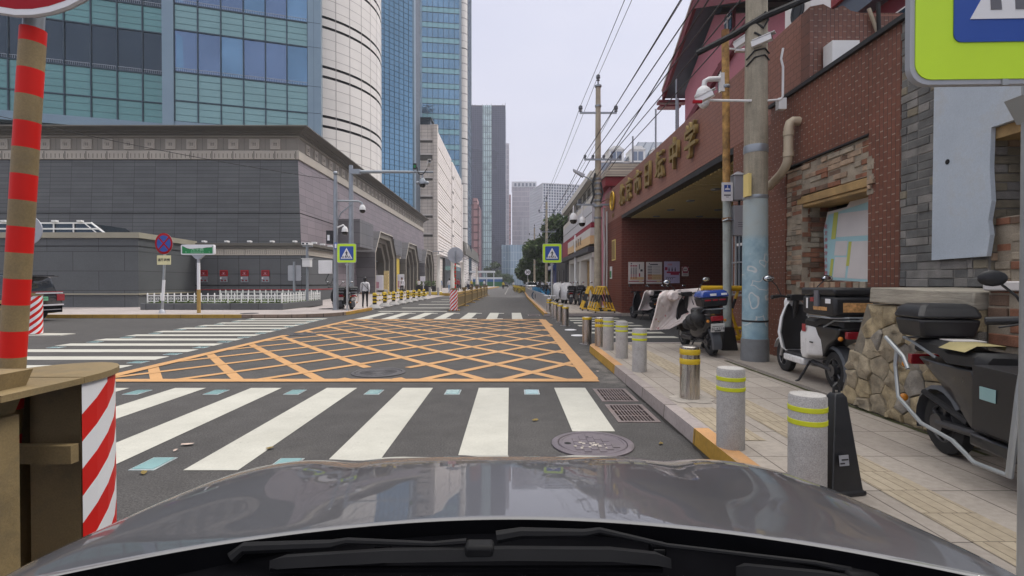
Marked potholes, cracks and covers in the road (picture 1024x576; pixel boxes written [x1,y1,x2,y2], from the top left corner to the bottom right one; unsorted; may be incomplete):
drain grate [605,404,661,423]
drain grate [593,389,639,402]
manhole cover [552,431,634,456]
manhole cover [351,368,405,378]
